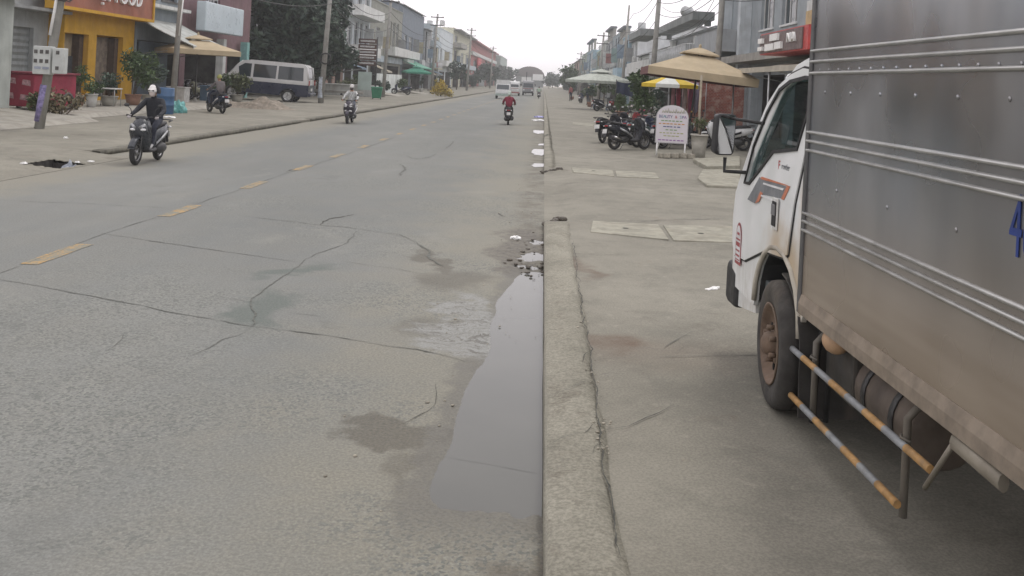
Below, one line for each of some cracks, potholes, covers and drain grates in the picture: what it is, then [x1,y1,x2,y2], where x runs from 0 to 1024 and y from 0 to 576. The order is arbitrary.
crack [176,215,443,363]
